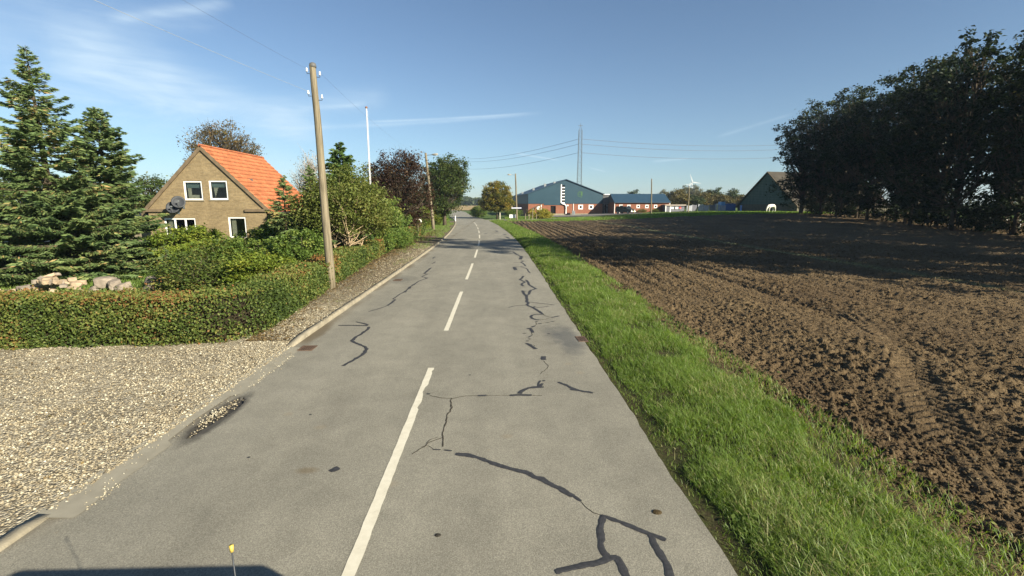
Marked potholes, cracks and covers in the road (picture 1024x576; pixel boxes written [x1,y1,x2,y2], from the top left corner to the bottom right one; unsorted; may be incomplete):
pothole [186,397,246,439]
crack [412,356,600,515]
